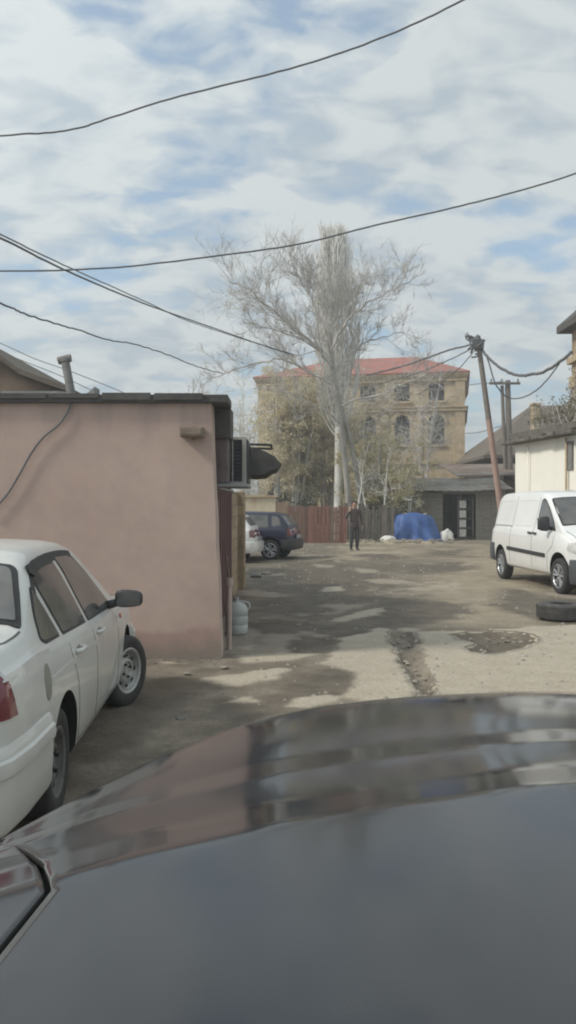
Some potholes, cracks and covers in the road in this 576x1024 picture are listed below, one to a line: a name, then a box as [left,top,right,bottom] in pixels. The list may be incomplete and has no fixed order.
pothole [445,630,544,655]
